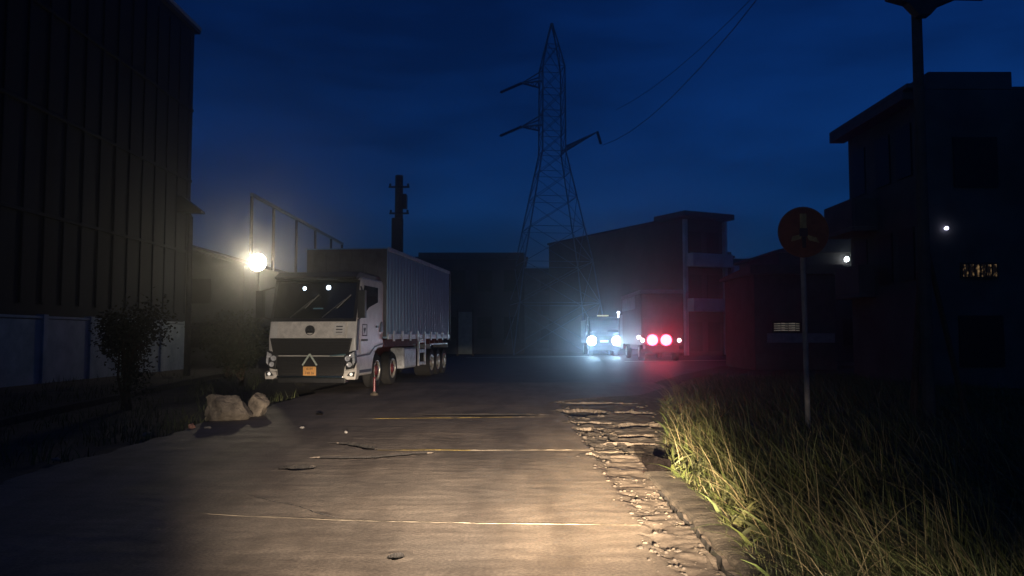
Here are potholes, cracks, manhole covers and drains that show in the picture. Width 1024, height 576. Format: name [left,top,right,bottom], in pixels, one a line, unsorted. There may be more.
crack [591,428,637,456]
crack [649,489,741,576]
crack [303,441,439,460]
pothole [376,550,415,563]
pothole [270,464,326,472]
